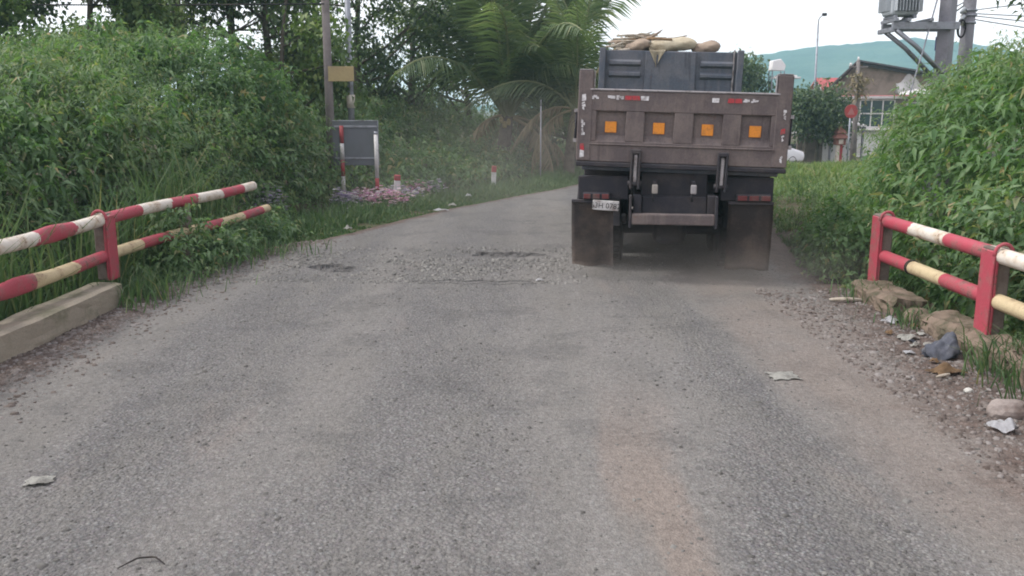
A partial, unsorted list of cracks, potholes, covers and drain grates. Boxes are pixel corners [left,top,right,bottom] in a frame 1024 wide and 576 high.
pothole [465,252,555,260]
pothole [300,264,363,275]
